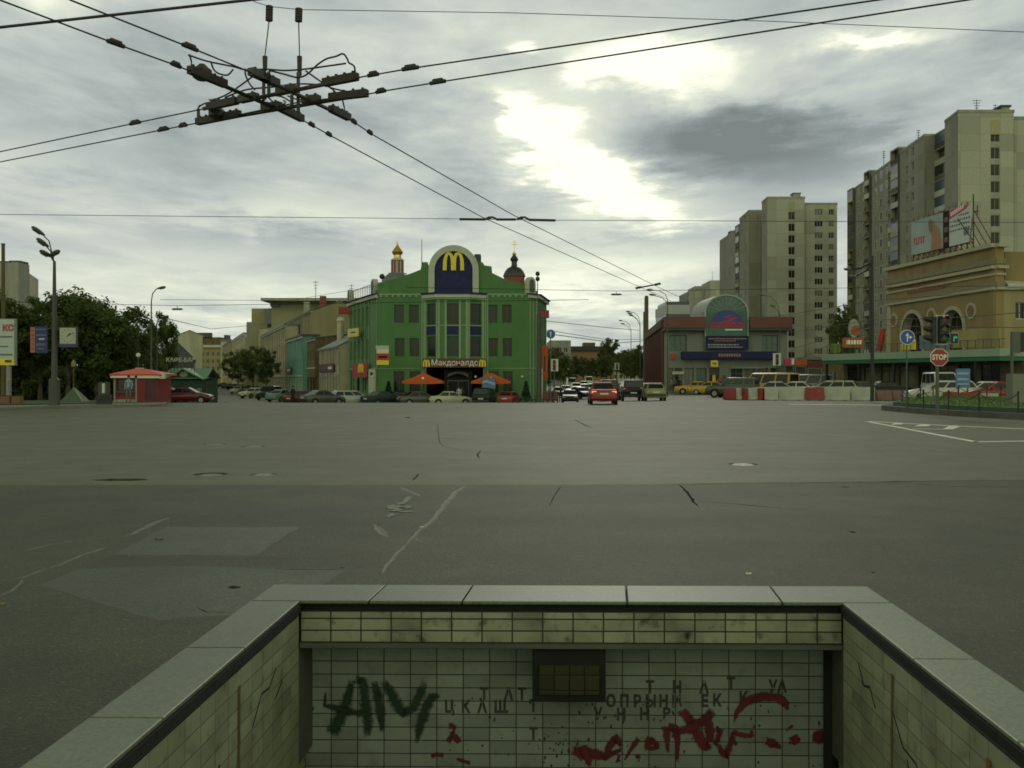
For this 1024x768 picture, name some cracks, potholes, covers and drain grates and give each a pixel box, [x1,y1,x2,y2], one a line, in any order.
crack [374,474,466,573]
crack [680,480,985,511]
